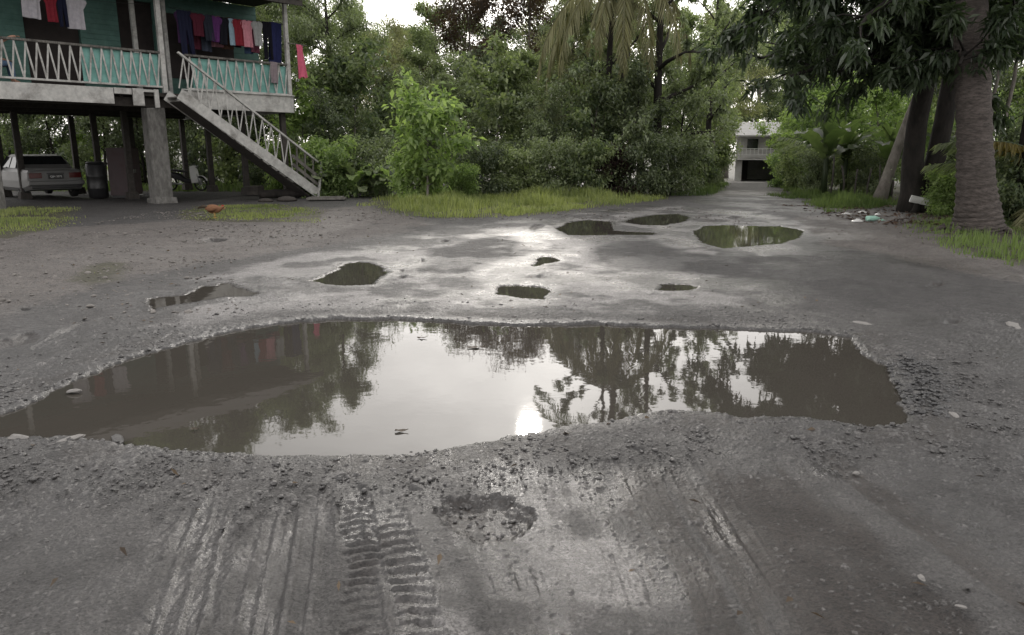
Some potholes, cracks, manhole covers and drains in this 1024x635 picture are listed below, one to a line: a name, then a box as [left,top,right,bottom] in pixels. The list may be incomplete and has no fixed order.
pothole [622,214,693,226]
pothole [489,283,558,300]
pothole [304,261,395,287]
pothole [522,255,564,267]
pothole [421,486,556,552]
pothole [552,219,660,236]
pothole [652,282,703,292]
pothole [0,313,933,464]
pothole [140,281,270,313]
pothole [688,224,808,249]
